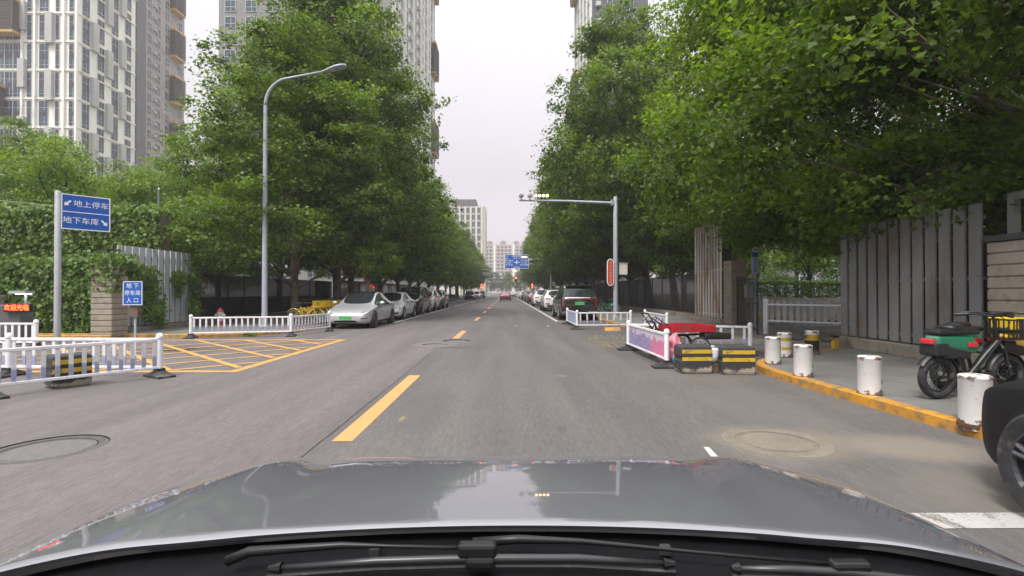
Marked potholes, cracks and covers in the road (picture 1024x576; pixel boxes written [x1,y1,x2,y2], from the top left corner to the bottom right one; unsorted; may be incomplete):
manhole cover [721,428,836,458]
manhole cover [0,434,110,465]
